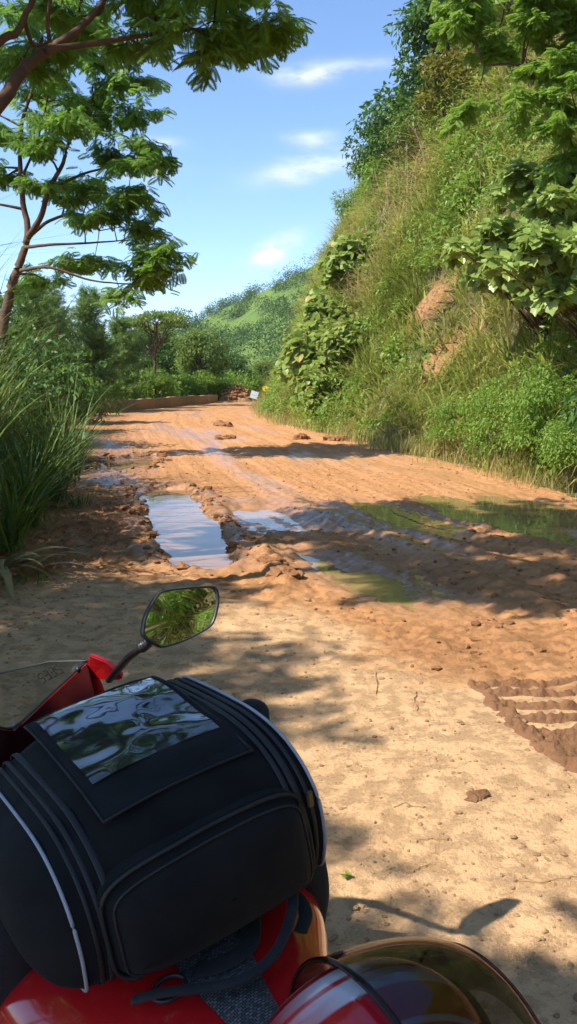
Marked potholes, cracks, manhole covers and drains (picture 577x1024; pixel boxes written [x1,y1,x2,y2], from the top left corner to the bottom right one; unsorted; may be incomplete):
pothole [119,482,269,571]
